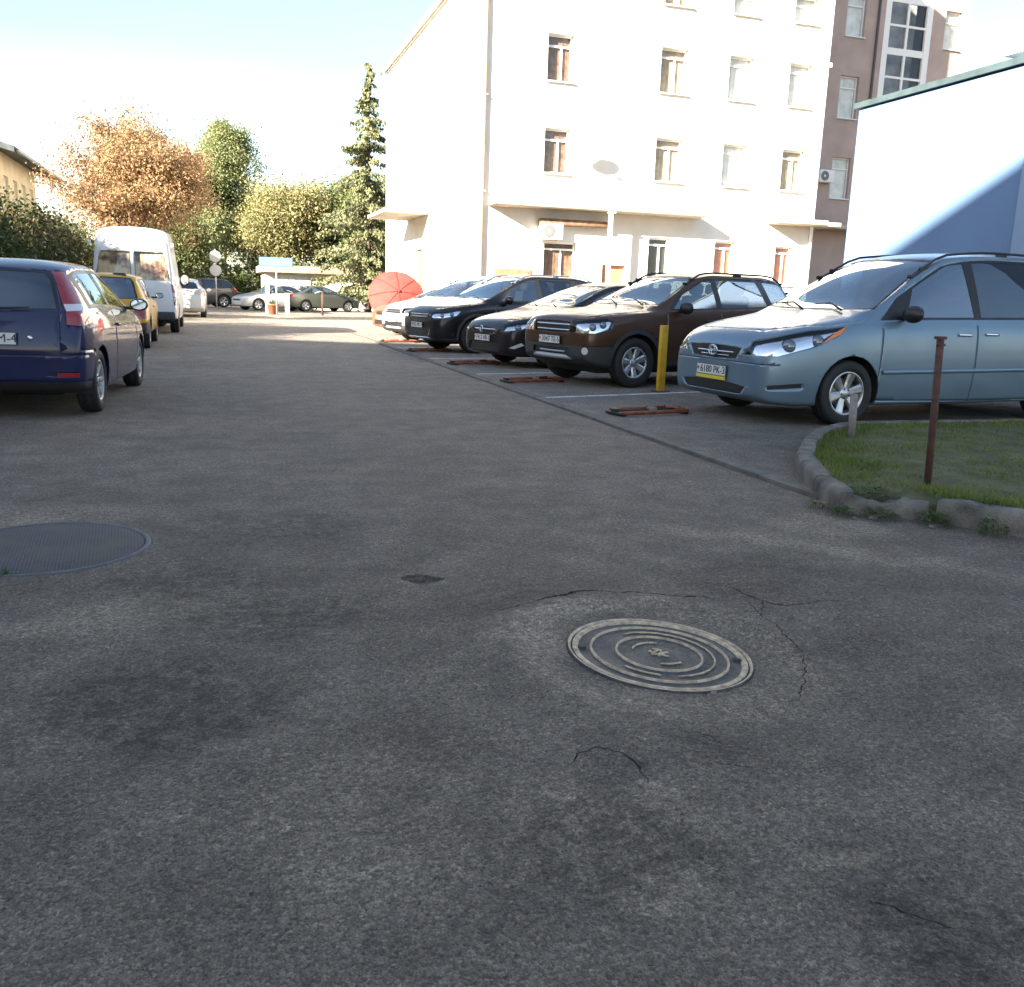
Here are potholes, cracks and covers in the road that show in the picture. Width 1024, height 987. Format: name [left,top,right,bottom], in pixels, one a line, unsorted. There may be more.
crack [869,901,957,929]
crack [570,746,649,784]
manhole cover [0,522,151,577]
manhole cover [567,618,754,694]
crack [499,585,861,711]
pothole [401,574,445,584]
